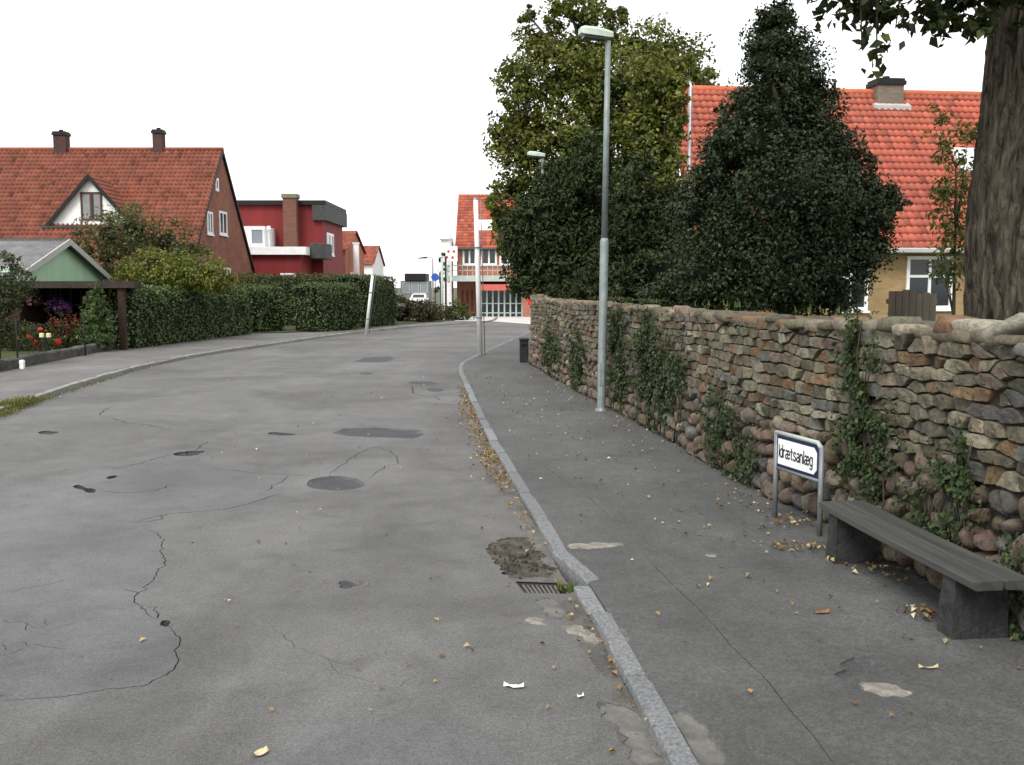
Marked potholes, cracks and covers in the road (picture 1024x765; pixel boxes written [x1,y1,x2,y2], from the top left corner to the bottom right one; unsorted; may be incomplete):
drain grate [515,581,566,594]
crack [3,619,72,655]
pothole [485,537,557,579]
crack [140,469,307,522]
crack [274,629,414,685]
pothole [338,580,358,589]
